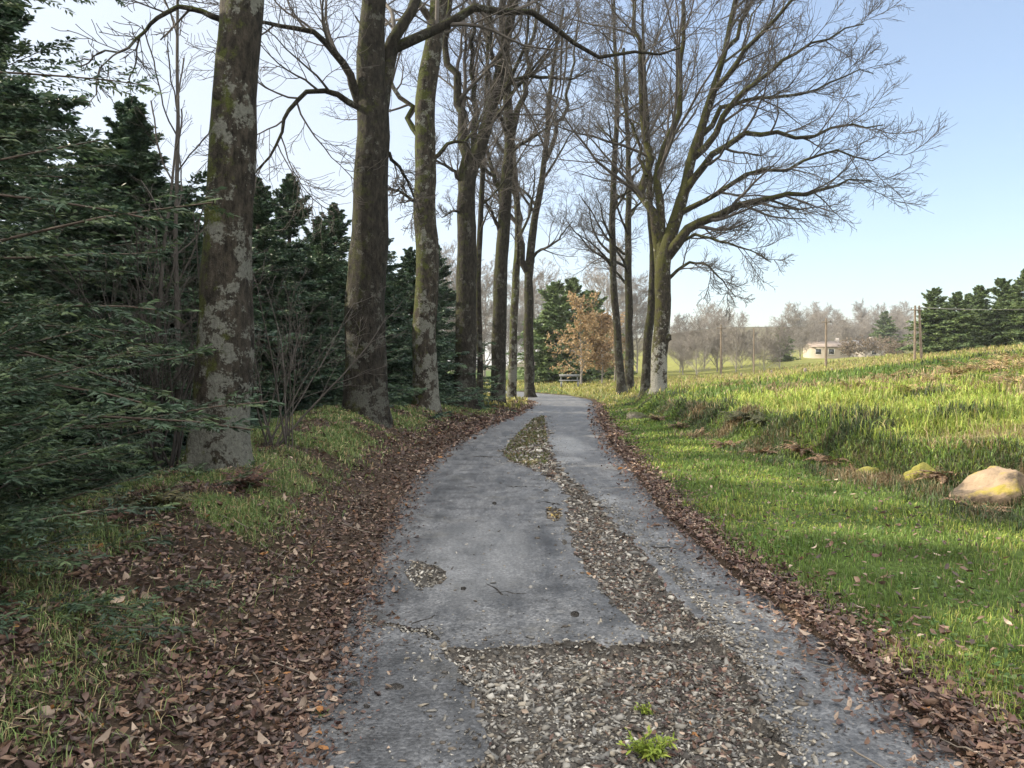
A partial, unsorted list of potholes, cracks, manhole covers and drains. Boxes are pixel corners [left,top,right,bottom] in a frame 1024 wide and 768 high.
pothole [439,636,794,768]
pothole [545,506,563,522]
pothole [405,560,448,588]
crack [487,584,525,596]
